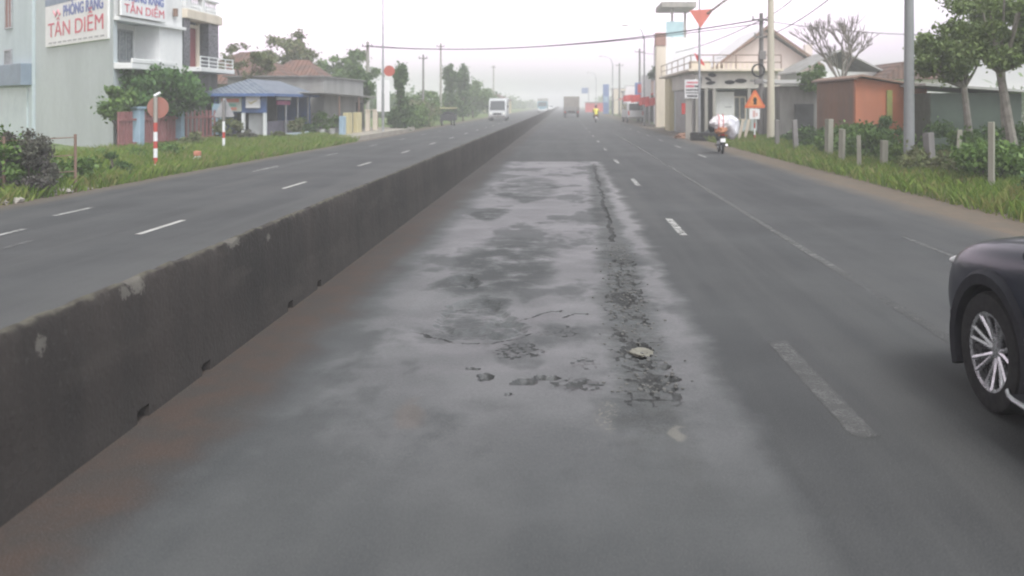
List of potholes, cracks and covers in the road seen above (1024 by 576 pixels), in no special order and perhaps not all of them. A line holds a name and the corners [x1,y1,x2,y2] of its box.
crack [592,163,617,242]
pothole [465,367,495,382]
pothole [504,375,561,396]
pothole [607,292,637,308]
pothole [654,364,682,385]
crack [415,245,684,408]
